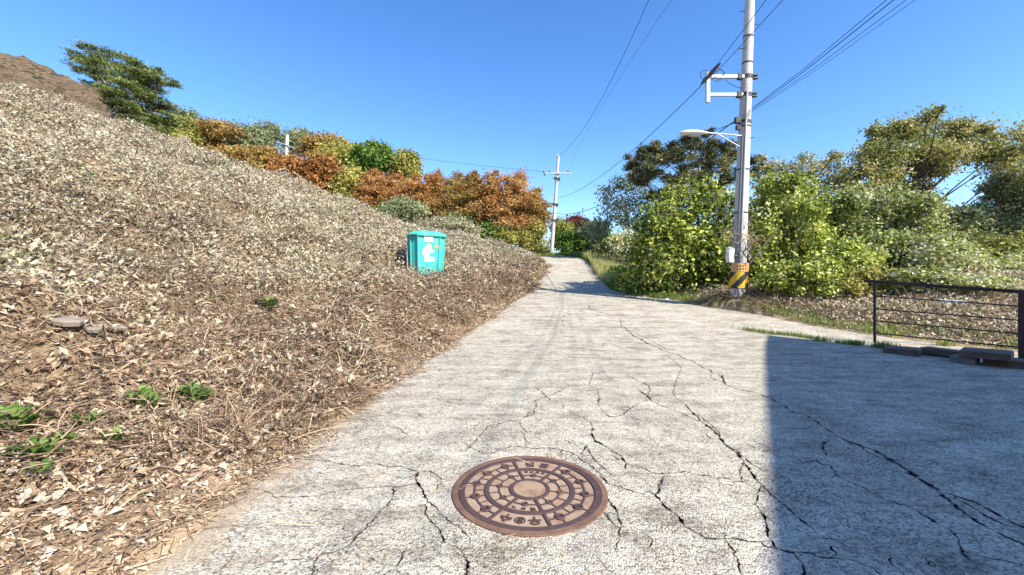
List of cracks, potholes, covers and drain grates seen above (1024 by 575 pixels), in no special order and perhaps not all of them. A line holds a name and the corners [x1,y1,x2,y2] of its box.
manhole cover [452,456,608,537]
crack [257,459,470,575]
crack [588,305,1024,568]
crack [466,357,898,575]
